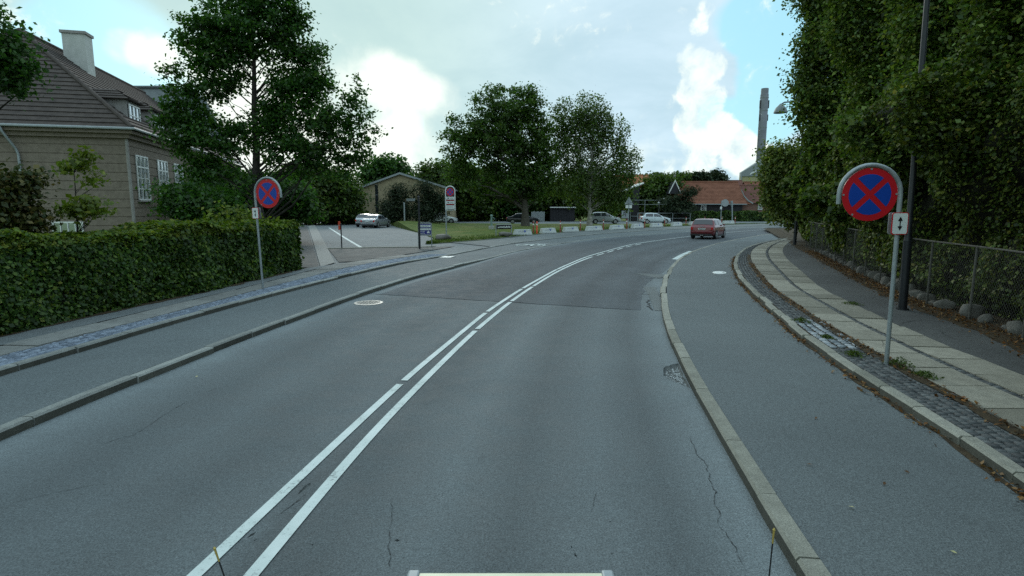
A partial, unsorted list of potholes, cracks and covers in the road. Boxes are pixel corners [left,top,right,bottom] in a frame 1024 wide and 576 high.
pothole [663,363,690,388]
crack [690,439,750,573]
